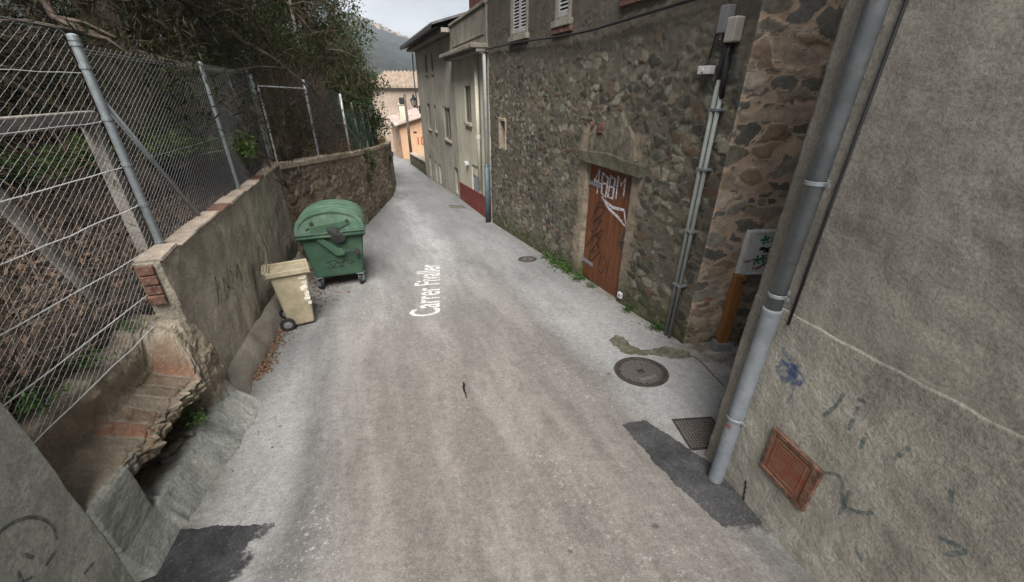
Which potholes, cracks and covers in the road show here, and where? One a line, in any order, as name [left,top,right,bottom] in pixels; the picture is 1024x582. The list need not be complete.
manhole cover [614,357,669,387]
